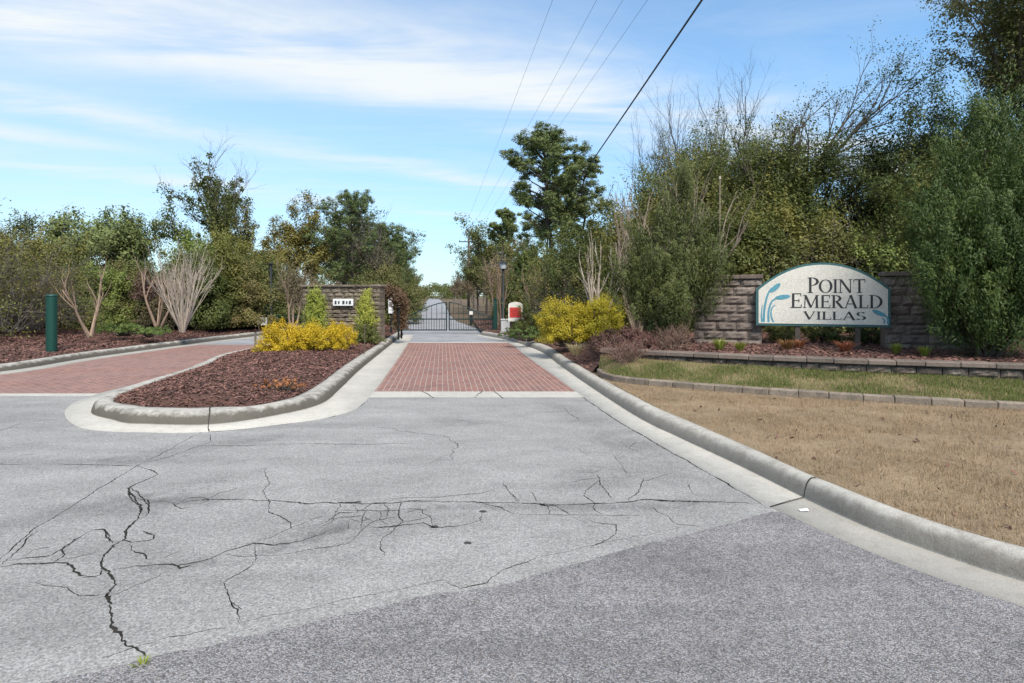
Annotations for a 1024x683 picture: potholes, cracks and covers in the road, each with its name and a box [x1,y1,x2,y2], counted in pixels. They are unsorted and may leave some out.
crack [0,406,756,657]
